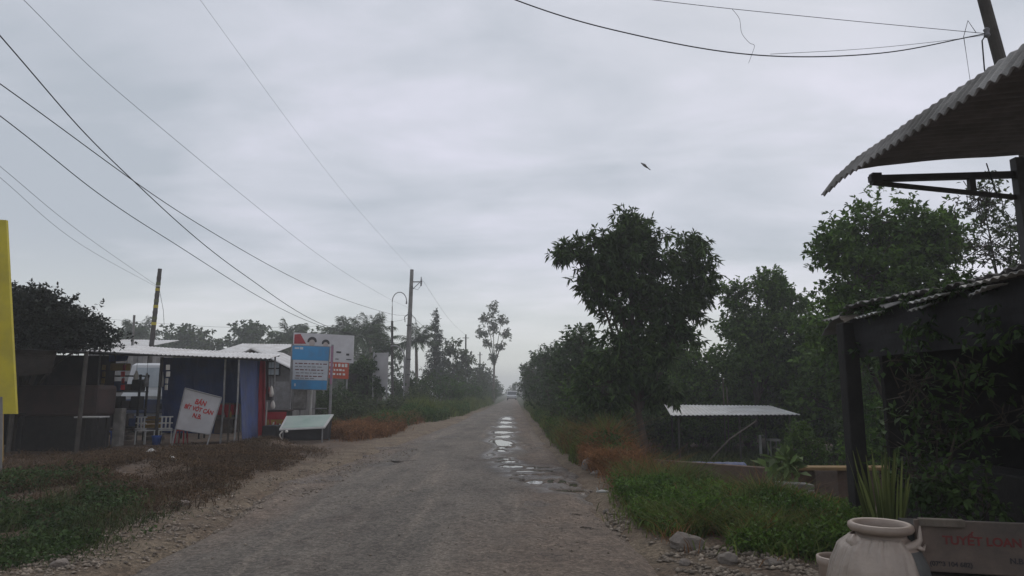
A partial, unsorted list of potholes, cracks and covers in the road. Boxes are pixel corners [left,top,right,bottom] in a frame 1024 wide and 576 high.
pothole [488,439,515,448]
